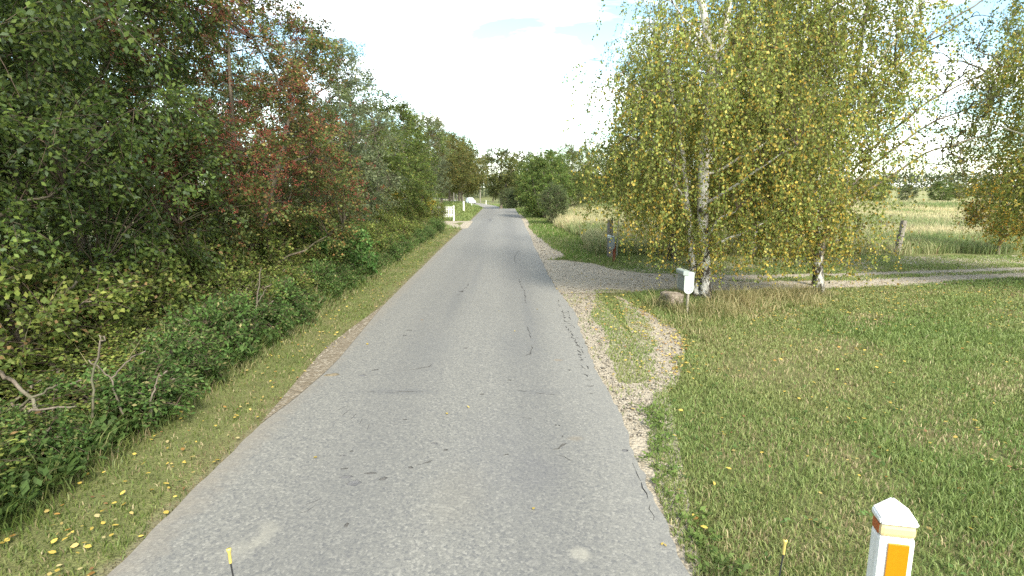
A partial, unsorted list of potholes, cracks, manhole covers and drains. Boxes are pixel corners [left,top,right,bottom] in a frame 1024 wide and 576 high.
crack [558,300,594,394]
